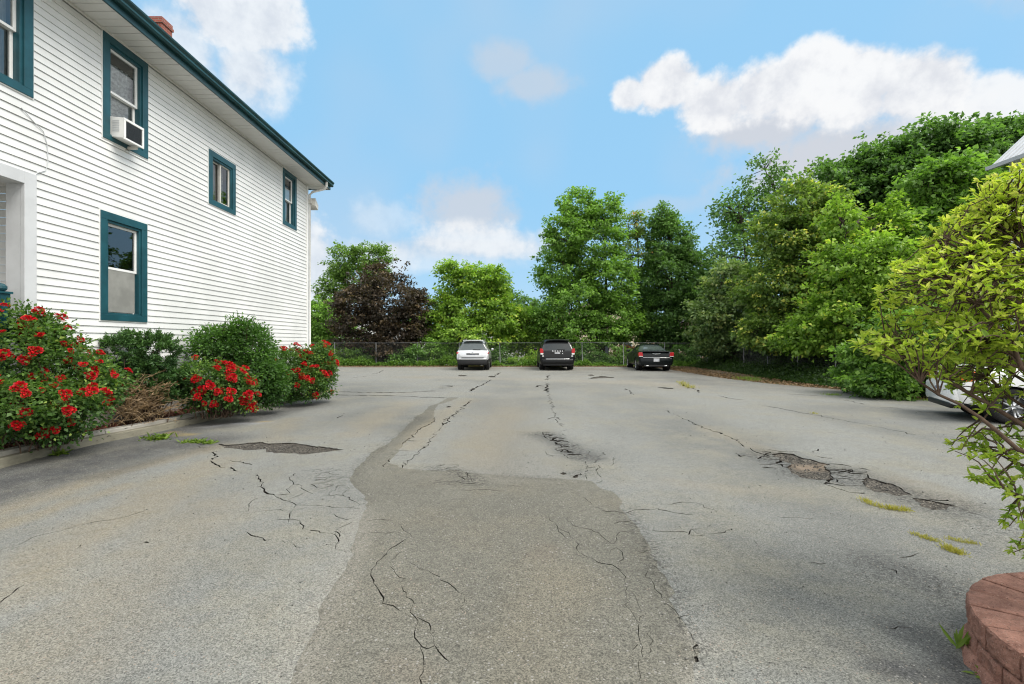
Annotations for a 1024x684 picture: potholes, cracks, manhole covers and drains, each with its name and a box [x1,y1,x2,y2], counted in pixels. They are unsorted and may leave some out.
pothole [862,478,912,496]
pothole [772,452,834,480]
crack [549,499,732,682]
crack [667,411,869,494]
crack [542,417,614,483]
crack [230,460,360,549]
pothole [913,498,953,510]
crack [383,373,520,491]
crack [365,519,465,684]
